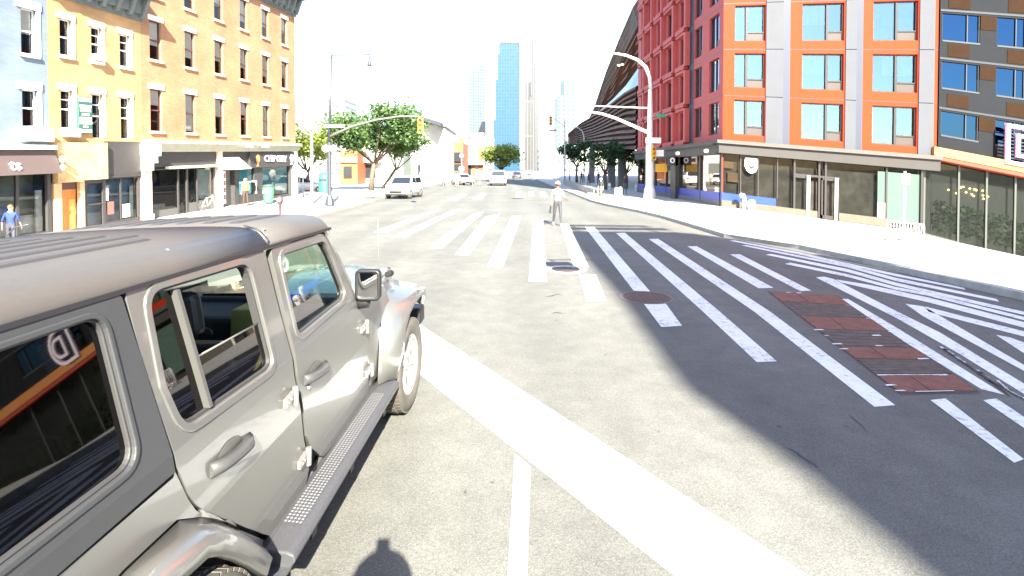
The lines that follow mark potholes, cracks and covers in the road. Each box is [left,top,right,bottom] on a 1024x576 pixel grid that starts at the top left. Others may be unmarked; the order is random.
manhole cover [545,265,587,274]
manhole cover [619,291,674,304]
